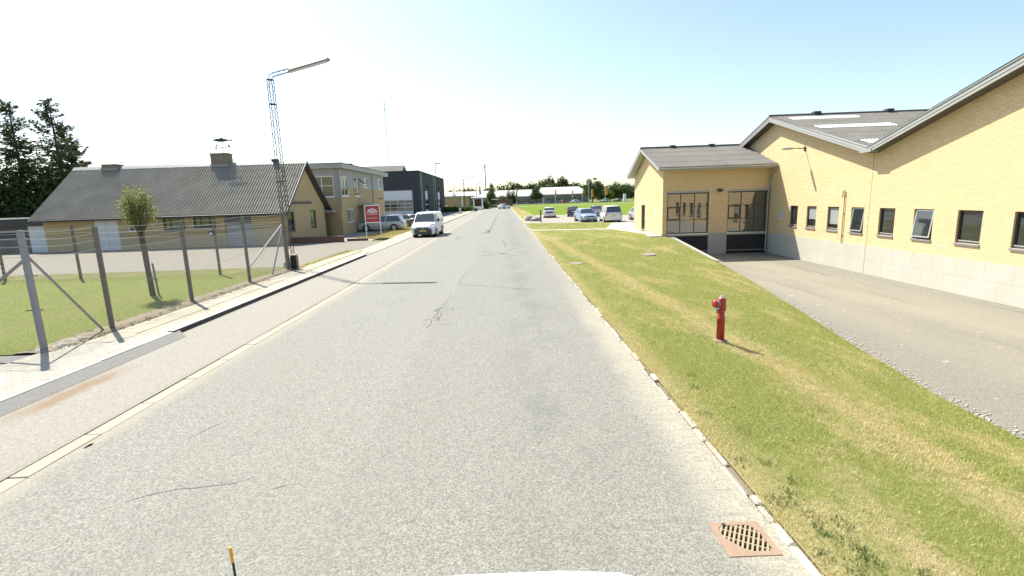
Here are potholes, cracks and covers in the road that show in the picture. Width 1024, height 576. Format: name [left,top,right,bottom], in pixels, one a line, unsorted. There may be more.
crack [118,477,253,504]
